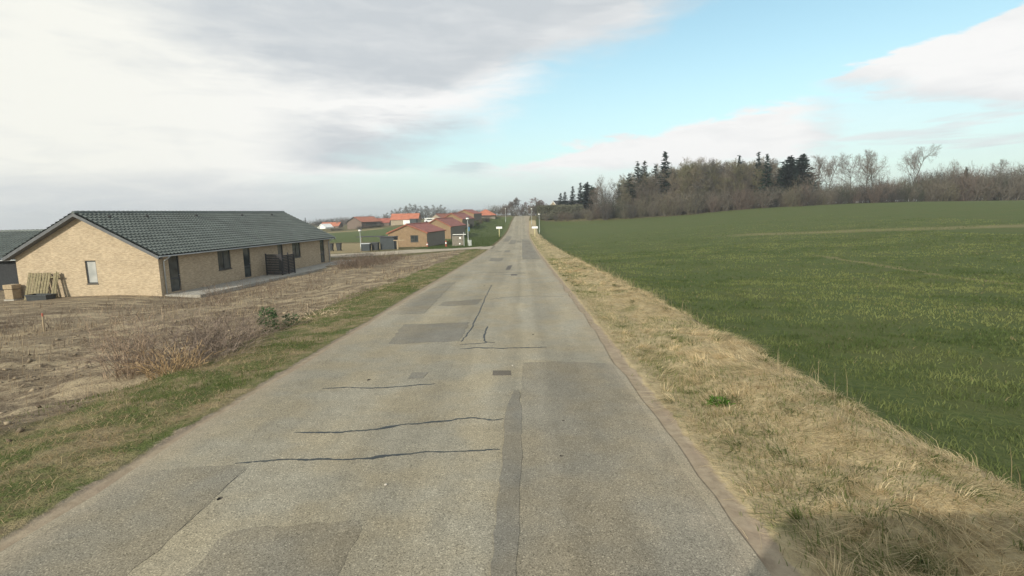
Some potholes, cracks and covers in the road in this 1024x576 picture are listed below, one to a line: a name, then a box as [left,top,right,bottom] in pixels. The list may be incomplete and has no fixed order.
crack [461,272,564,349]
